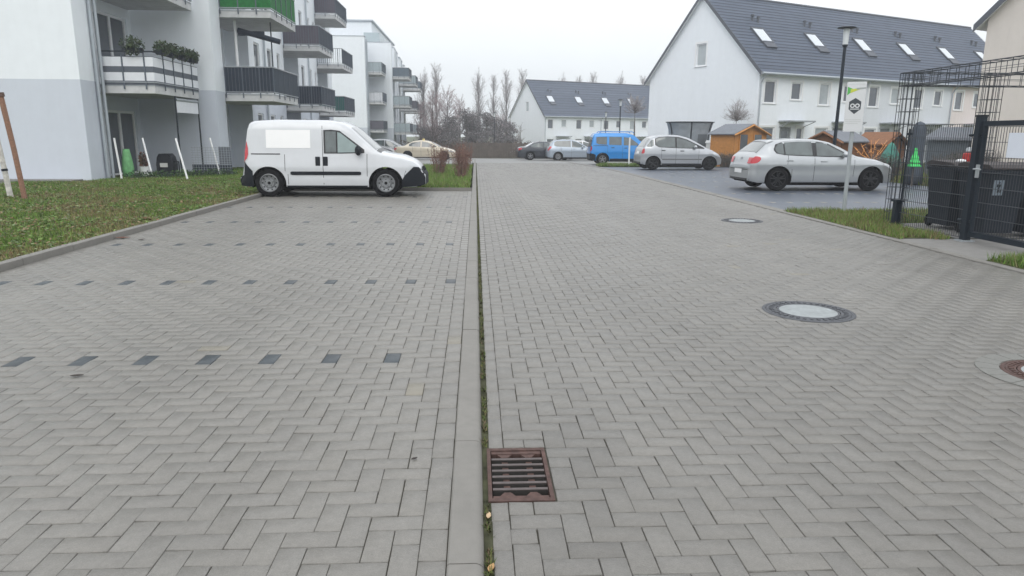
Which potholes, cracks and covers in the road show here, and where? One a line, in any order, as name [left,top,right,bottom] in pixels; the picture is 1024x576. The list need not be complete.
drain grate [487,448,555,504]
manhole cover [762,301,856,323]
manhole cover [974,354,1024,387]
